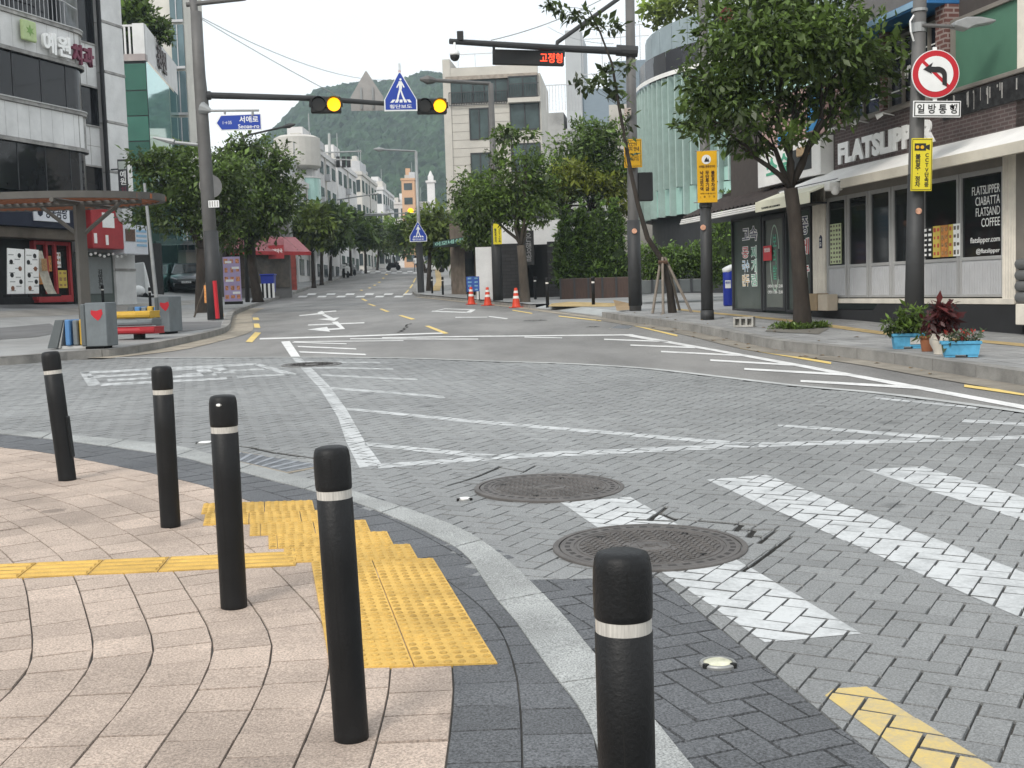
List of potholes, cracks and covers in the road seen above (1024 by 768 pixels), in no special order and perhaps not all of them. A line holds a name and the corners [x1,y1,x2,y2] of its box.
drain grate [239,451,314,474]
manhole cover [474,473,624,504]
manhole cover [553,524,748,573]
